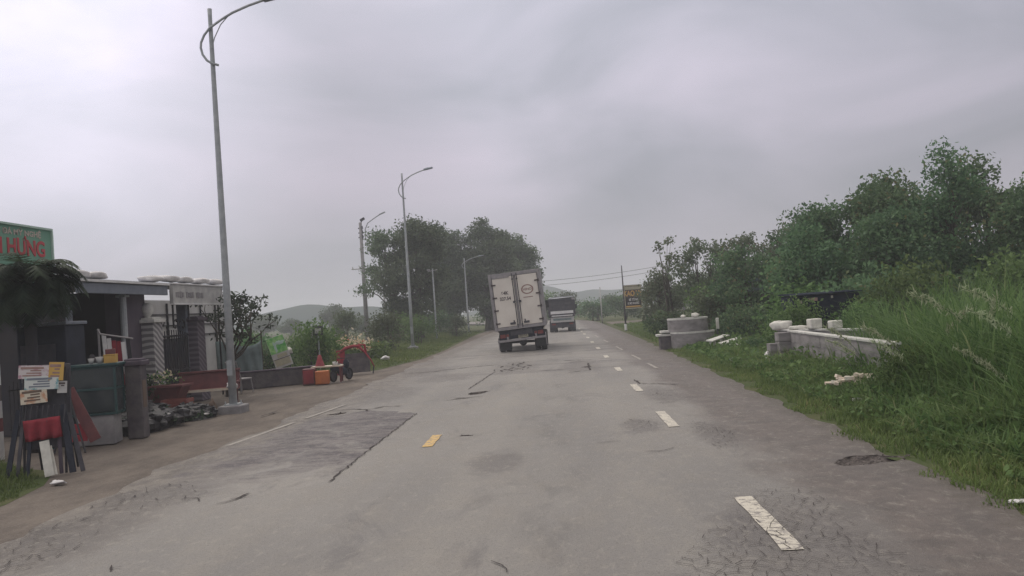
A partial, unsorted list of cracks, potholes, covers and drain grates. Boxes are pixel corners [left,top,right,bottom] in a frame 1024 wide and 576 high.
crack [677,486,922,576]
pothole [834,454,910,466]
crack [0,481,251,573]
